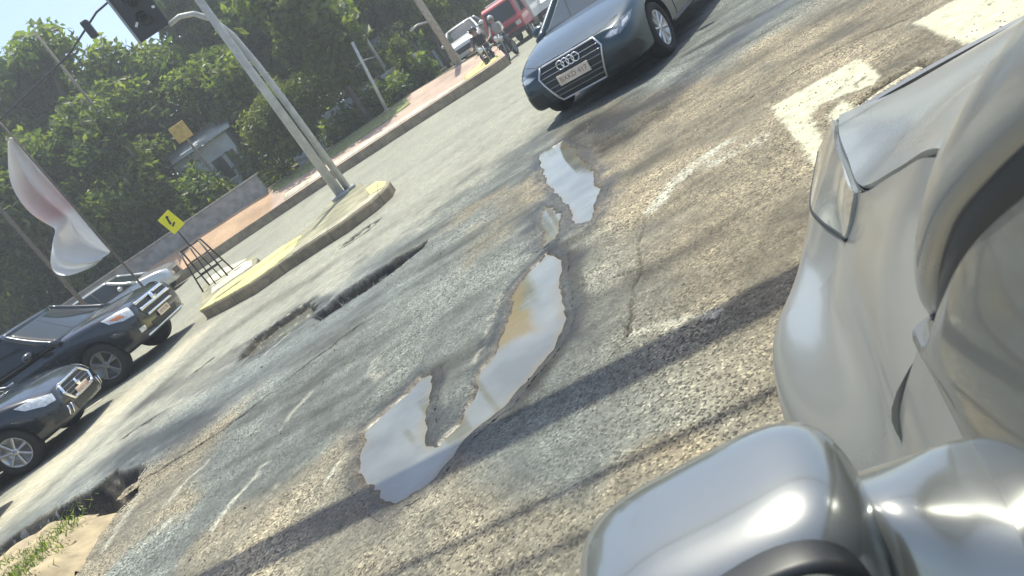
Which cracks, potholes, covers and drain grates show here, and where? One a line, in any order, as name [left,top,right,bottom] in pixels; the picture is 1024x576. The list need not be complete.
pothole [306,236,432,326]
crack [112,317,368,500]
crack [599,206,656,356]
pothole [234,297,330,363]
pothole [528,201,566,253]
pothole [534,137,610,231]
pothole [342,247,576,522]
pothole [0,458,155,557]
